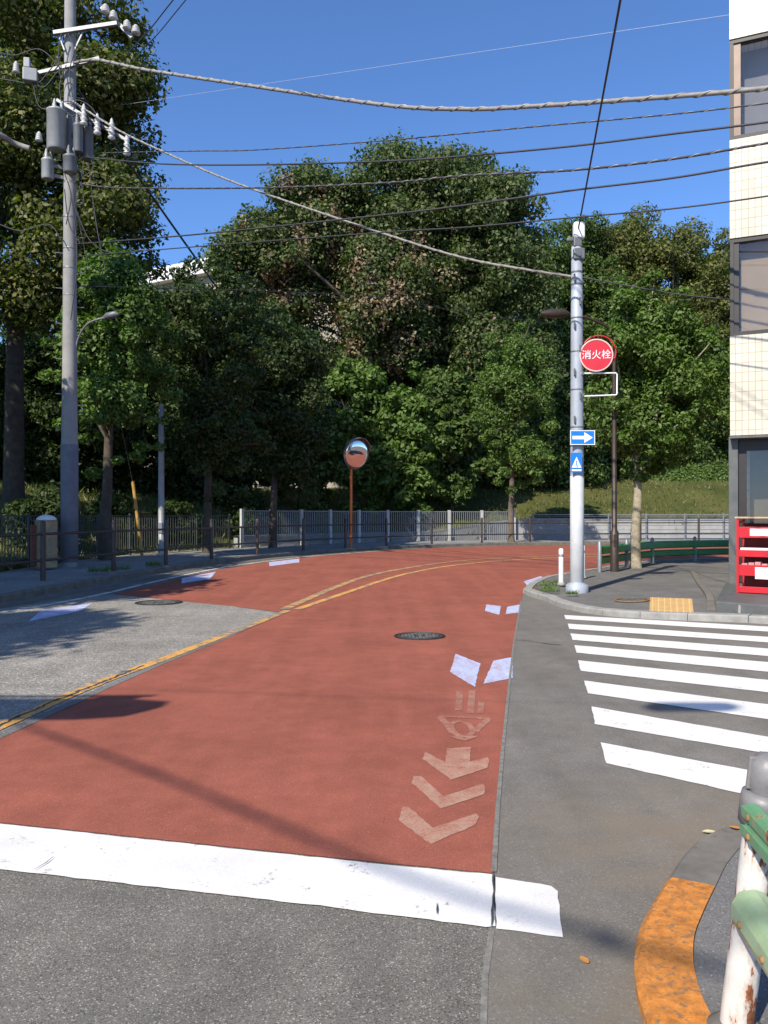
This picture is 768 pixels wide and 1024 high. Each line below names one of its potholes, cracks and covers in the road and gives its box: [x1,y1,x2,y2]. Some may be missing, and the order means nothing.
manhole cover [394,632,445,640]
